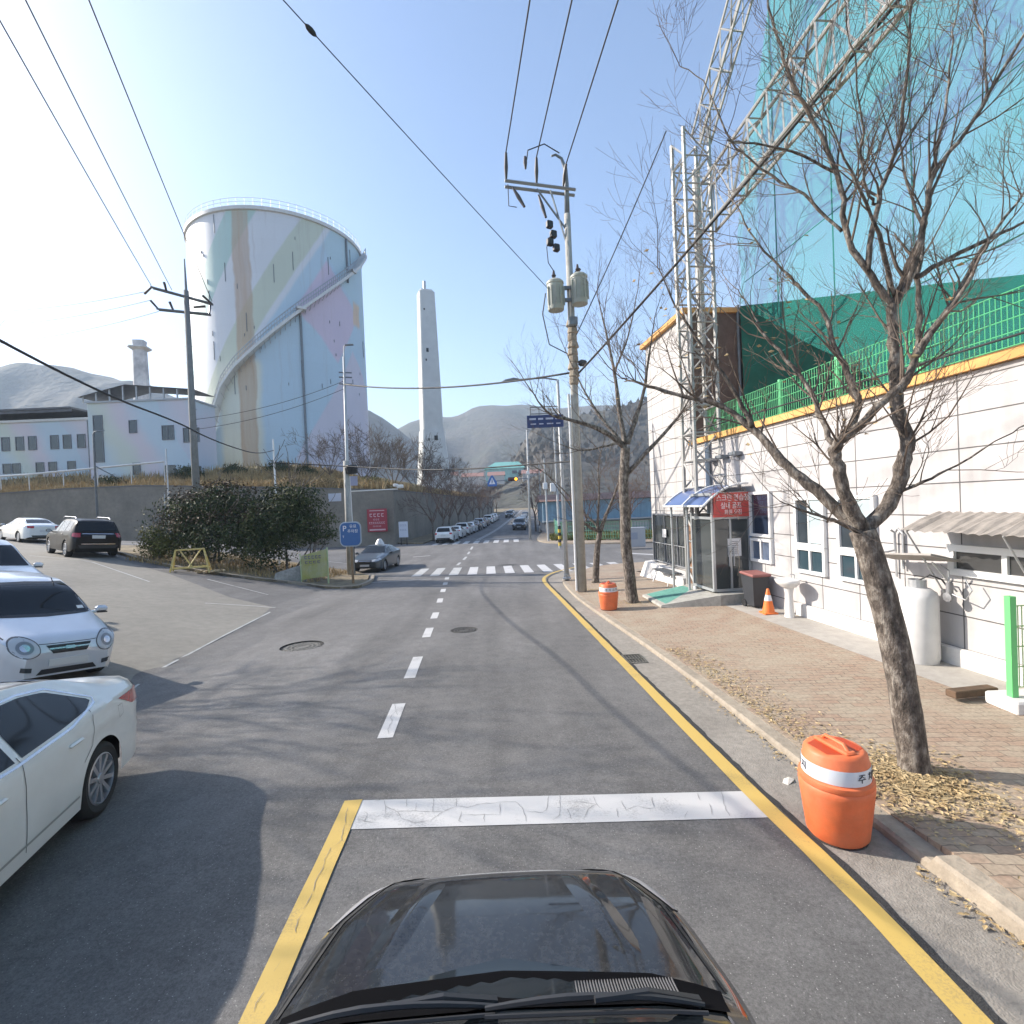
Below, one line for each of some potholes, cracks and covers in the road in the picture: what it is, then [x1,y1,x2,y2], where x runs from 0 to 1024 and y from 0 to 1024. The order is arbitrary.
drain grate [621,654,649,664]
manhole cover [279,641,324,651]
